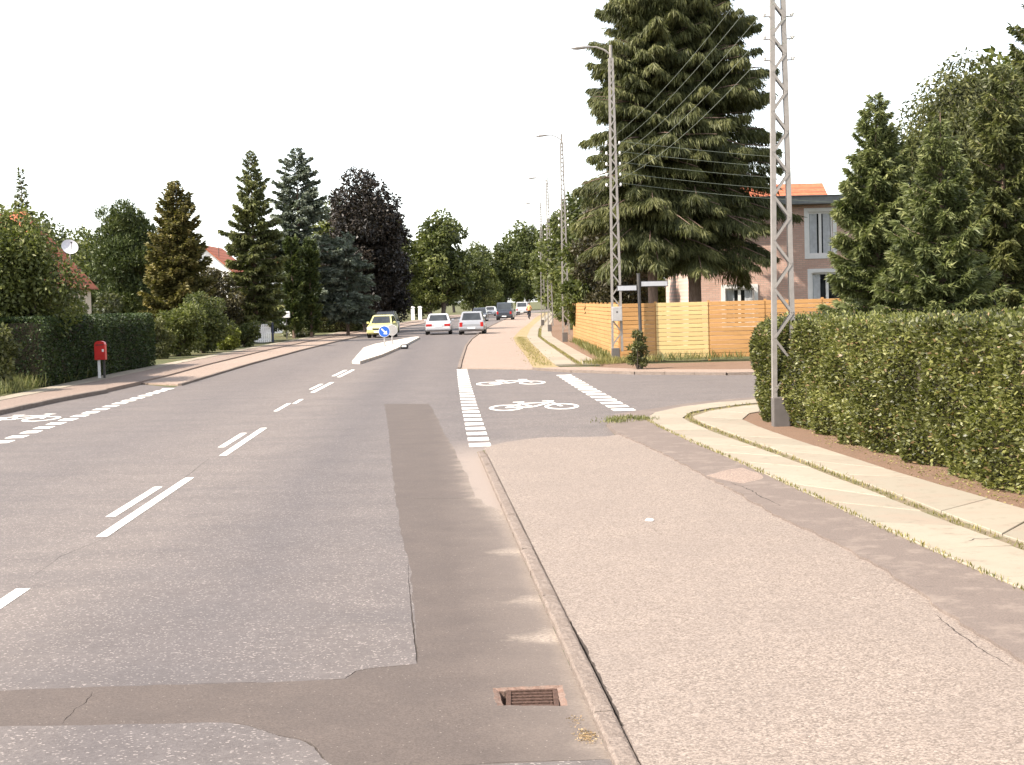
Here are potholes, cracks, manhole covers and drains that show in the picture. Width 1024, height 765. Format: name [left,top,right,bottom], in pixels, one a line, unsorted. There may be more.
drain grate [493,685,568,706]
crack [935,614,1011,667]
